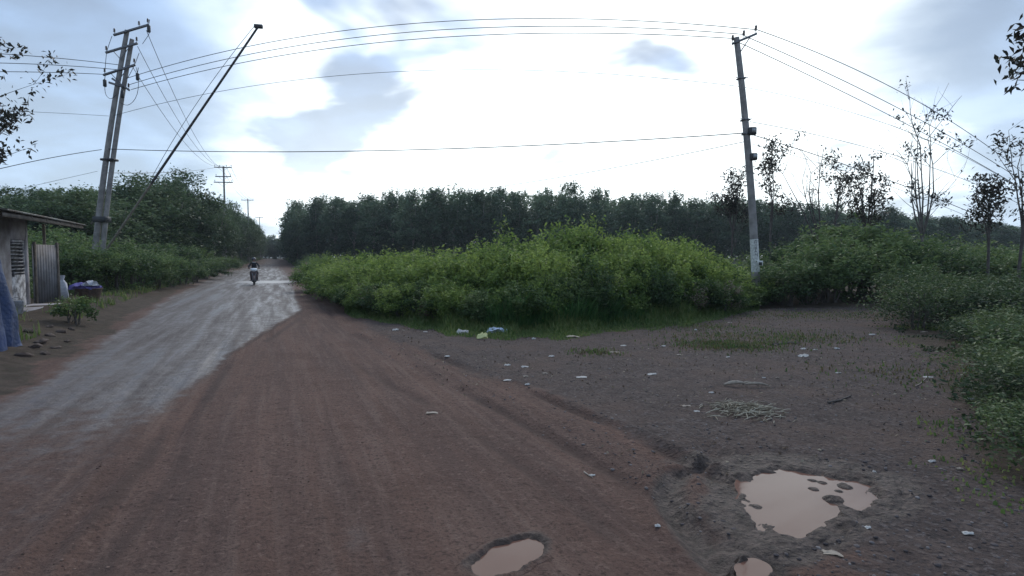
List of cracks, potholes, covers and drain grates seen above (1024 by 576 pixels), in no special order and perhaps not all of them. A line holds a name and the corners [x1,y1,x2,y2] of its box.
pothole [720,458,904,560]
pothole [729,555,776,576]
pothole [454,529,558,576]
